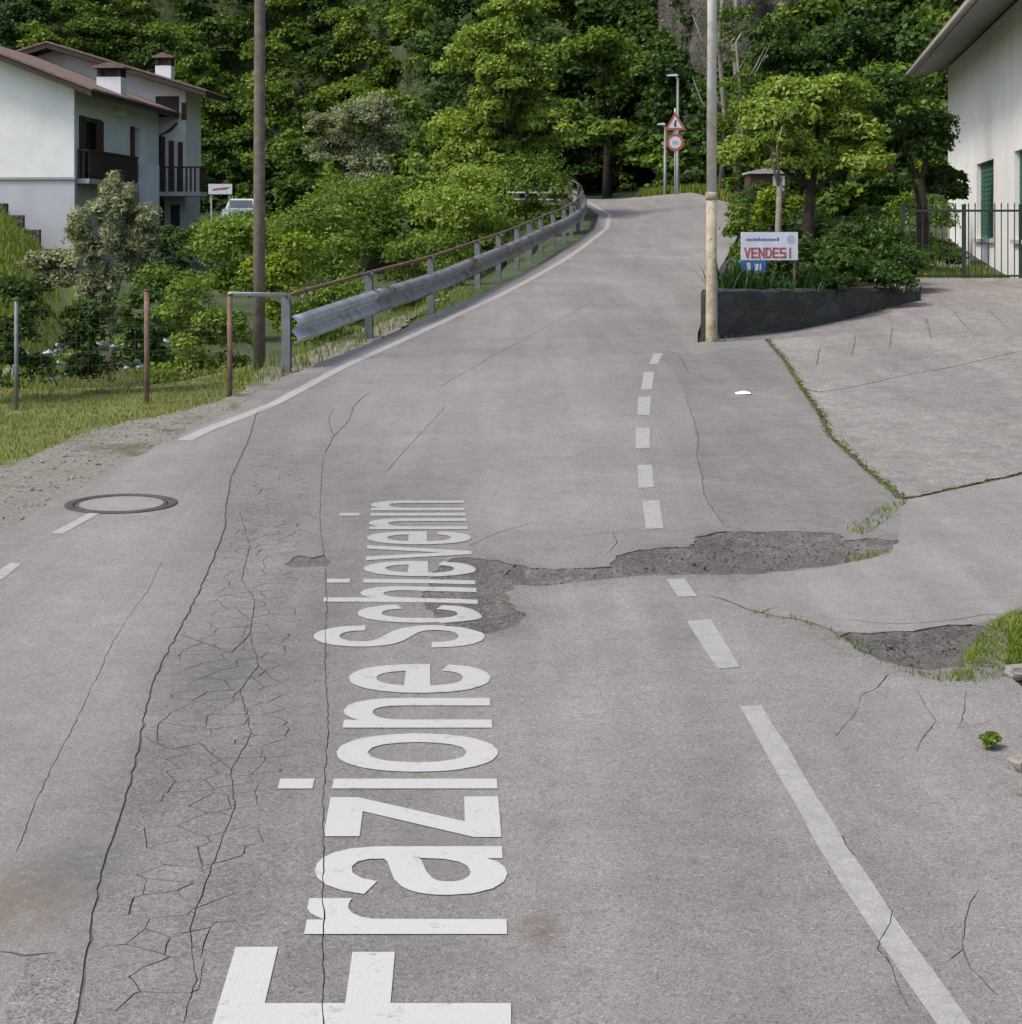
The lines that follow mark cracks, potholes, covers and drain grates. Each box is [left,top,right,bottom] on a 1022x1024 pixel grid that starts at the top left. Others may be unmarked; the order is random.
pothole [504,531,899,586]
pothole [421,557,527,634]
crack [74,403,305,1024]
crack [877,910,912,1012]
crack [325,394,367,453]
crack [951,890,1003,1000]
crack [836,674,995,751]
pothole [284,555,331,568]
manhole cover [64,494,178,514]
pothole [838,624,988,670]
